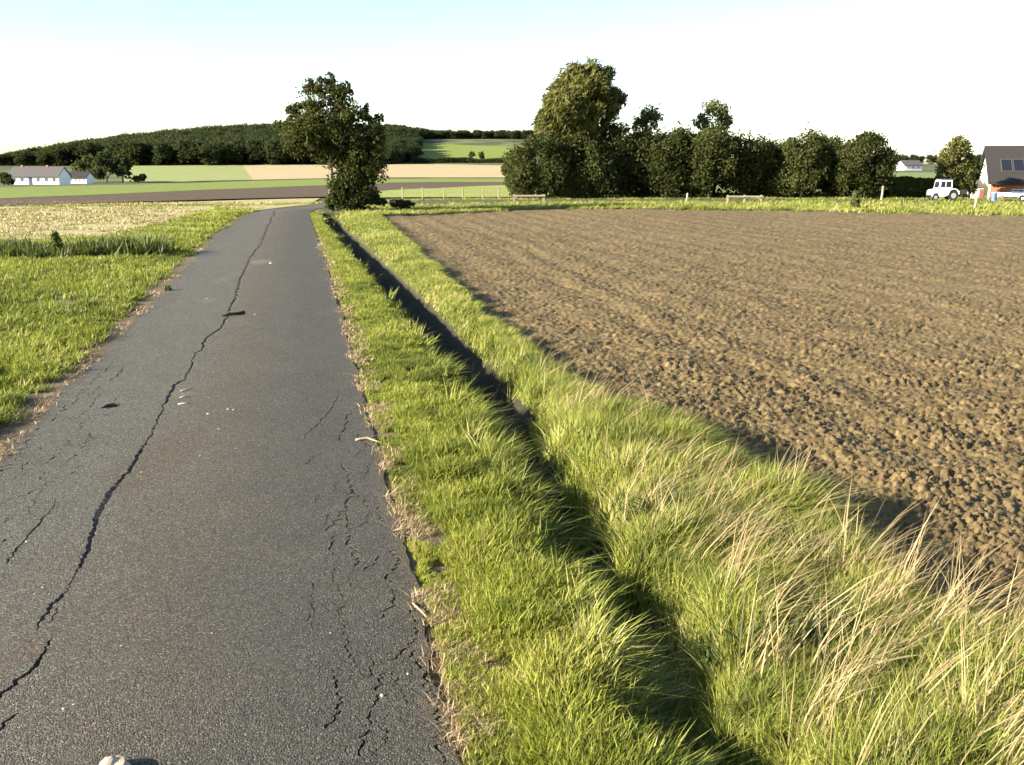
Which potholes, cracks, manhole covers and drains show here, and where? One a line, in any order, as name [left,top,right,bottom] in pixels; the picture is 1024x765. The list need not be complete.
crack [304,394,450,765]
crack [0,211,277,731]
